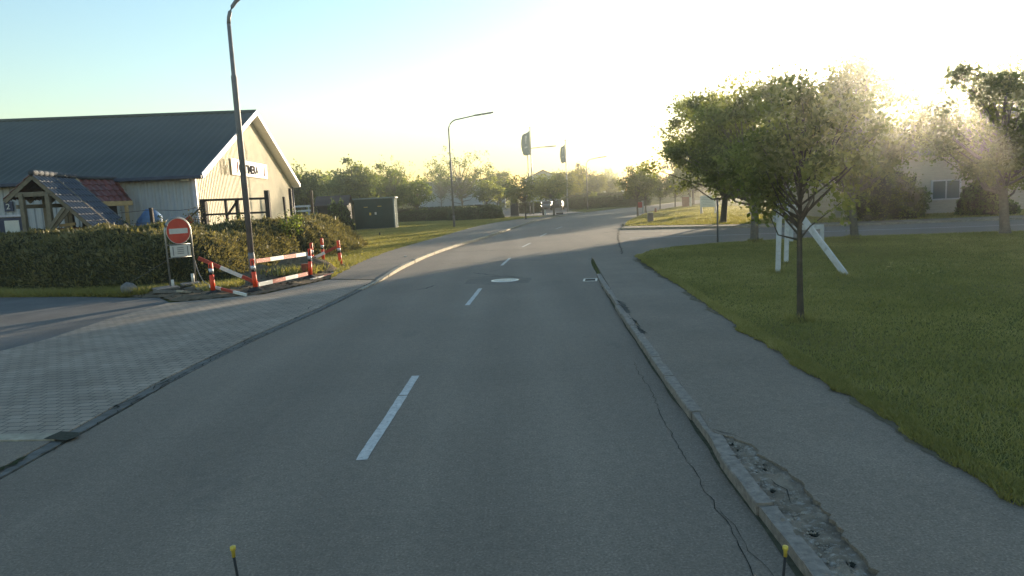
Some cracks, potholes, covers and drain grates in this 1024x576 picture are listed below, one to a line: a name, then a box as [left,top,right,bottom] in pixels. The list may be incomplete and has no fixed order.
crack [634,364,774,576]
pothole [724,437,875,576]
